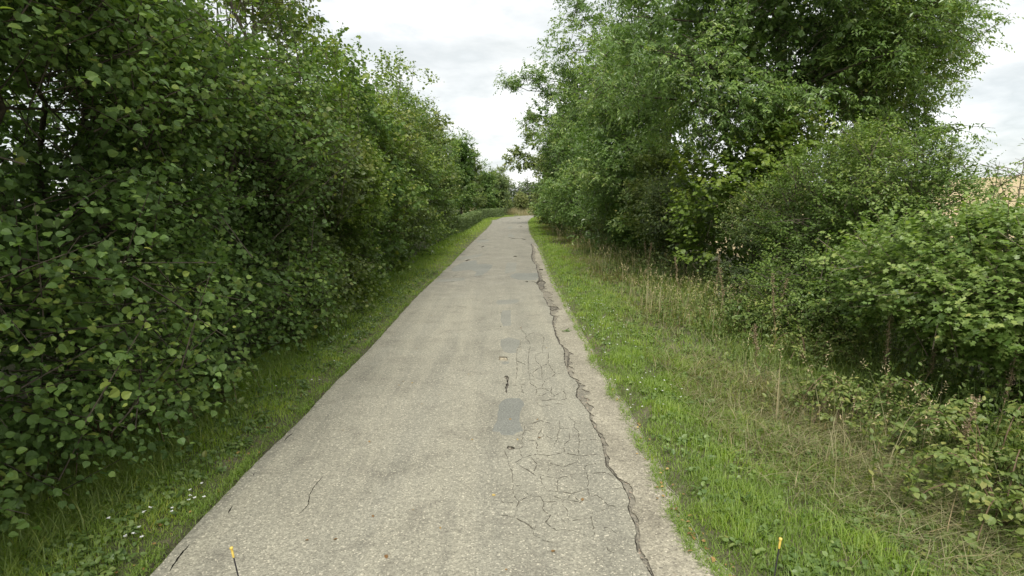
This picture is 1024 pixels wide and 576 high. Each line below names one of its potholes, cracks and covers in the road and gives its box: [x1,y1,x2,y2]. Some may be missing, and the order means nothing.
crack [502,237,654,576]
